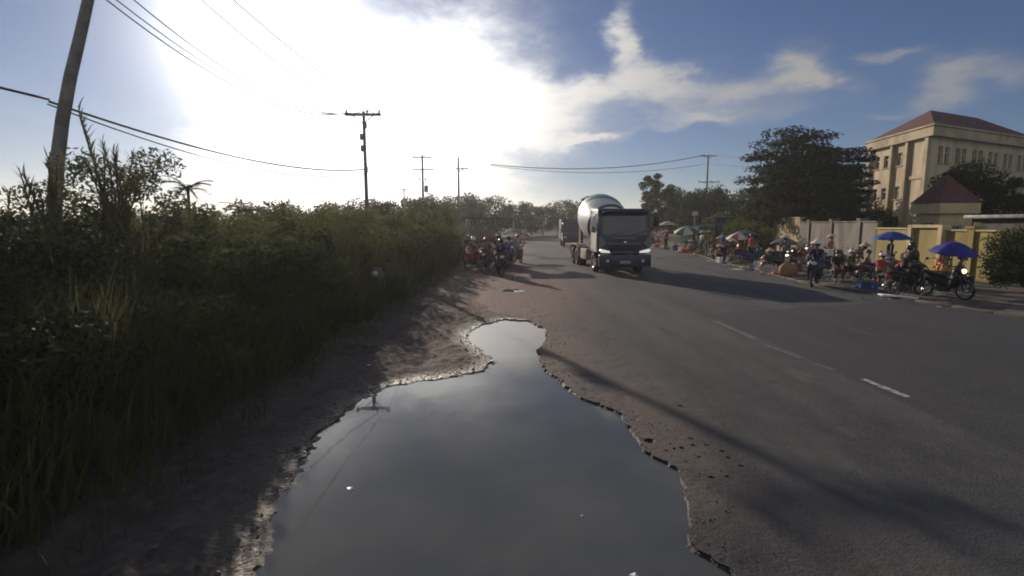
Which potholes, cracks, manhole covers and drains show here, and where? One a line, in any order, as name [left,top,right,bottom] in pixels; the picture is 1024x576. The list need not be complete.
pothole [253,319,736,576]
